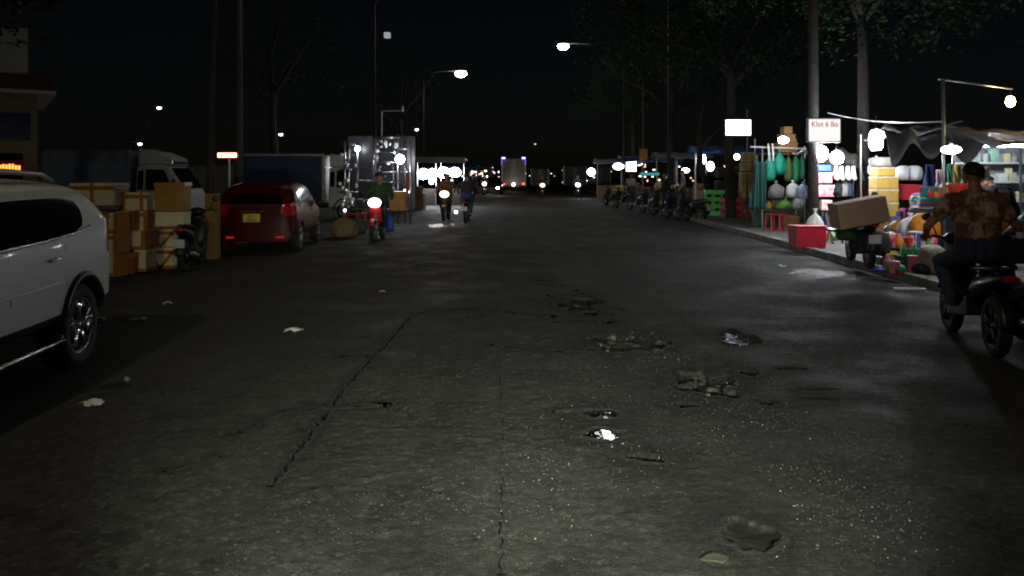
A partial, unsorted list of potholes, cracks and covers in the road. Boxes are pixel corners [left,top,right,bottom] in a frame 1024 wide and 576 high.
pothole [665,369,745,400]
pothole [733,368,765,378]
pothole [573,407,629,420]
pothole [549,296,608,313]
pothole [599,317,625,325]
pothole [583,330,677,353]
crack [238,280,622,487]
pothole [710,328,767,348]
pothole [568,425,633,442]
pothole [618,450,672,465]
pothole [712,514,790,556]
